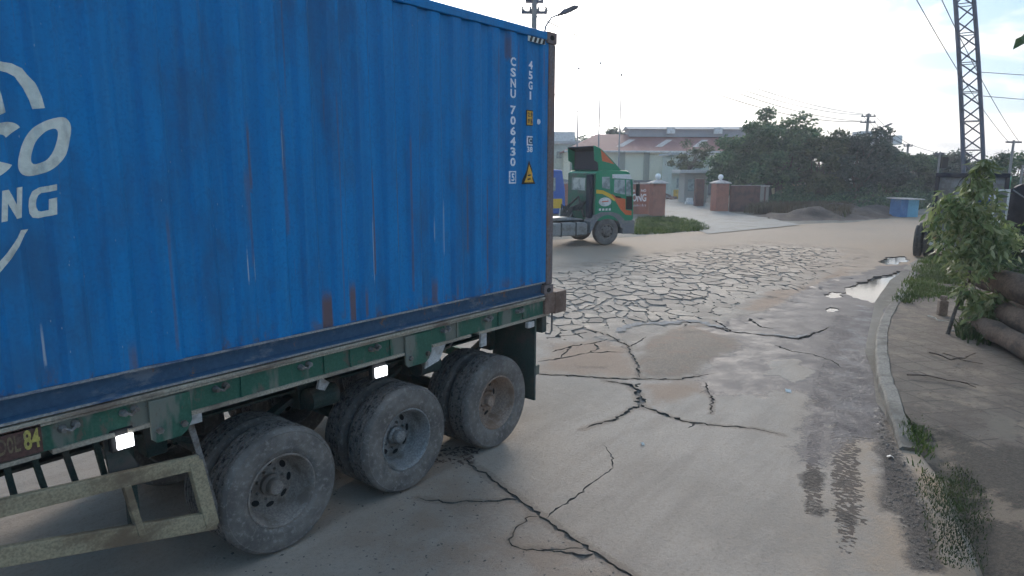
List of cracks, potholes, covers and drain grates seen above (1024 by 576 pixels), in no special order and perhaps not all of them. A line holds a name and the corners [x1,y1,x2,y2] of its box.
crack [538,331,781,435]
crack [713,318,842,368]
pothole [843,271,900,294]
crack [420,446,633,576]
